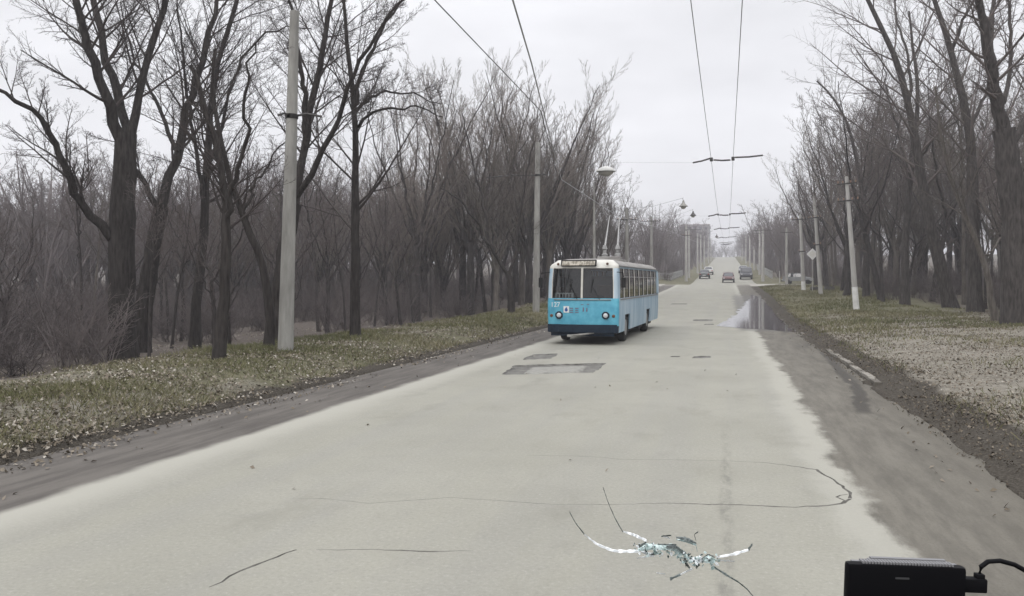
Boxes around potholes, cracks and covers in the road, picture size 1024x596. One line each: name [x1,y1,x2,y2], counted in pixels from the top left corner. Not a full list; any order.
crack [311,455,852,596]
crack [210,550,295,587]
